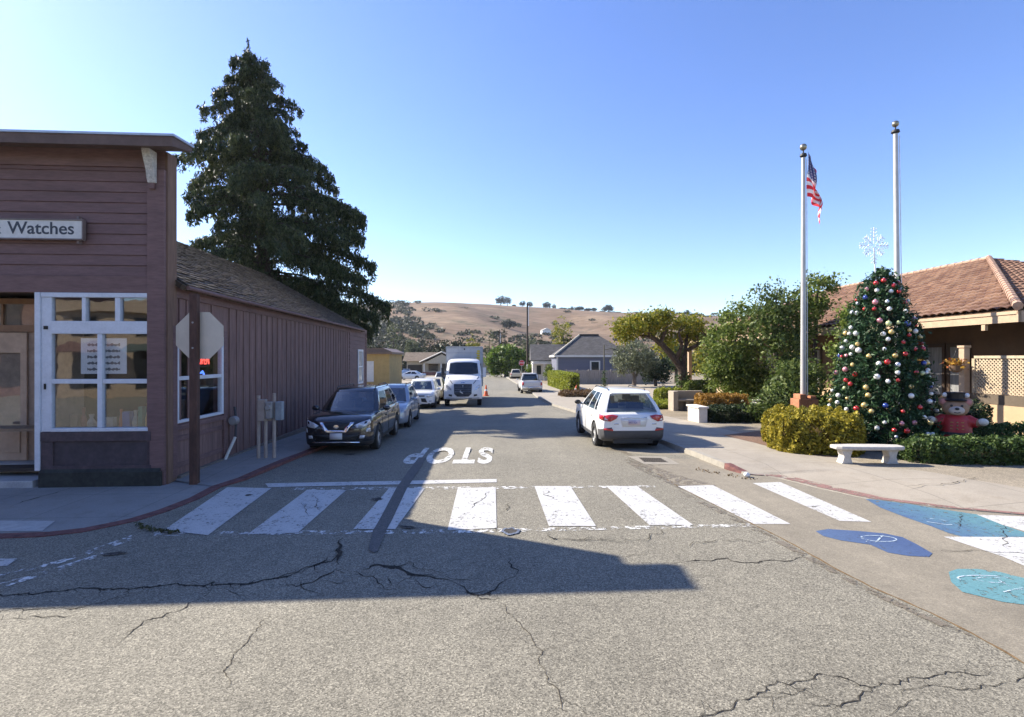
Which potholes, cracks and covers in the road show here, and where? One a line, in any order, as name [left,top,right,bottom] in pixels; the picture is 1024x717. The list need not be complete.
drain grate [628,456,679,464]
crack [698,659,1024,717]
crack [549,523,800,563]
crack [0,538,587,714]
